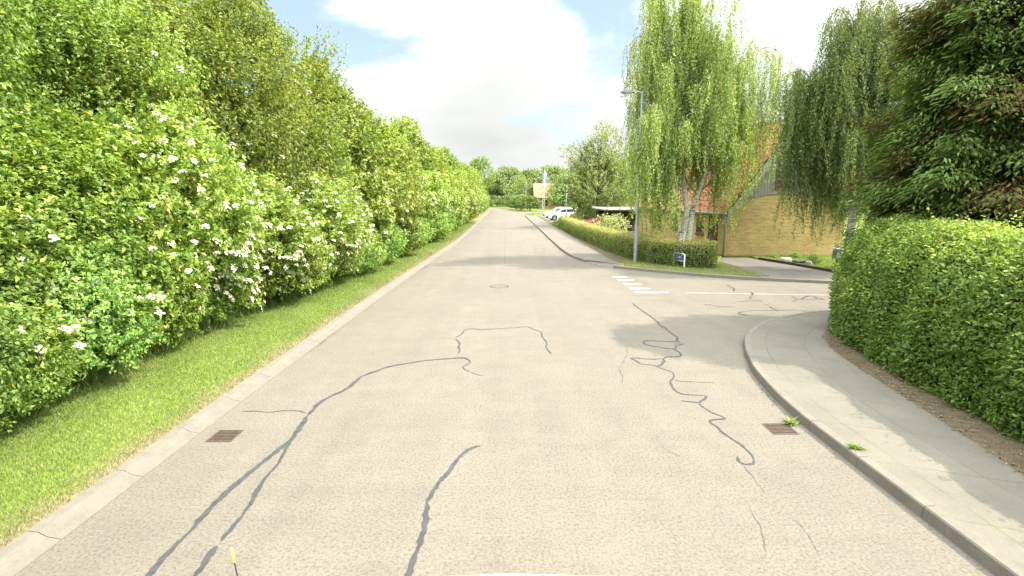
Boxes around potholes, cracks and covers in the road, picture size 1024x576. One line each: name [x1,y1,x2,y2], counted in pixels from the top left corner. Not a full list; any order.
crack [705,292,825,316]
drain grate [761,423,800,435]
drain grate [205,430,244,442]
